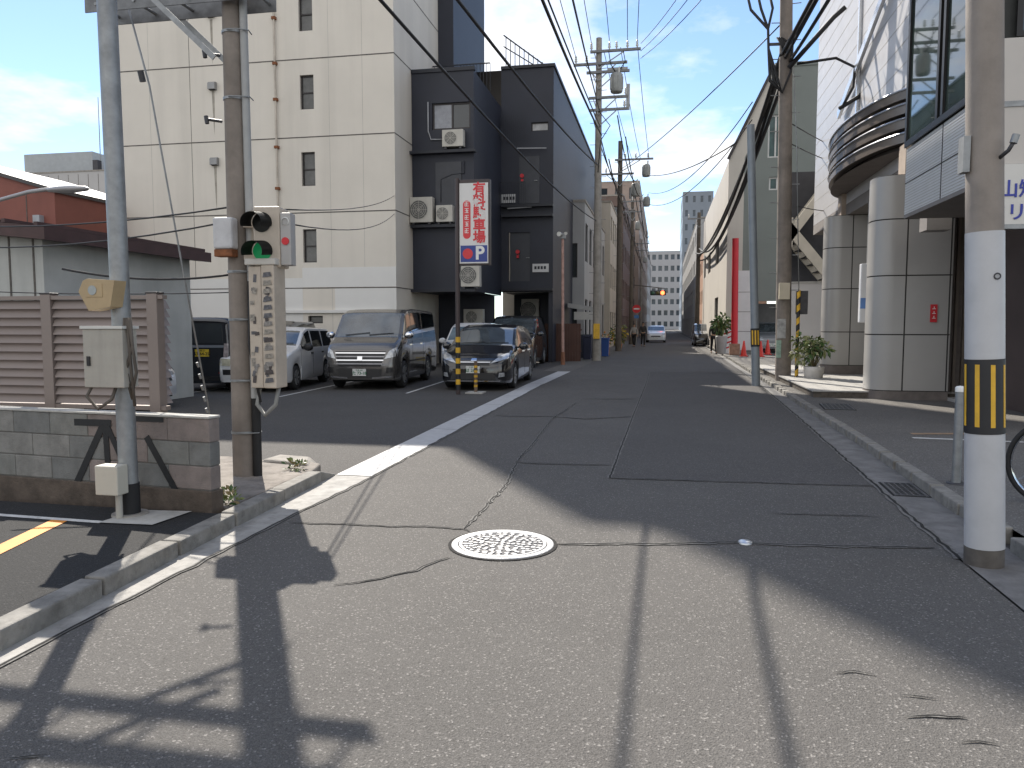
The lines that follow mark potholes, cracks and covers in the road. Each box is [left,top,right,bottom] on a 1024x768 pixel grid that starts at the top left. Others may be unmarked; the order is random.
manhole cover [448,529,557,561]
crack [843,670,967,718]
drain grate [878,481,932,498]
crack [334,556,452,585]
